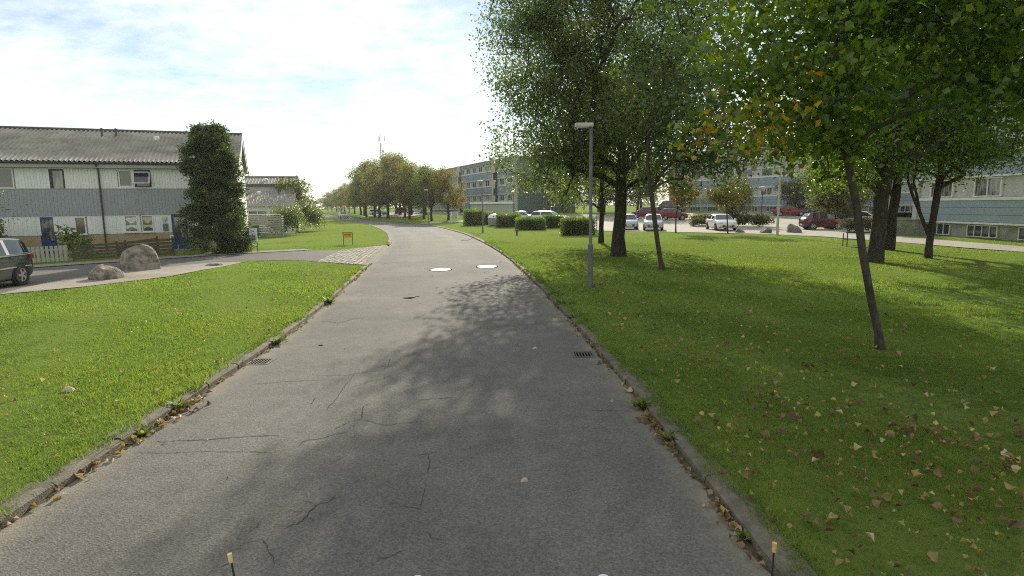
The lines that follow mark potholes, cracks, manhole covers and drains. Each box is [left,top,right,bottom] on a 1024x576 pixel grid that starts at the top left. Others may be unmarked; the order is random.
crack [146,435,279,453]
